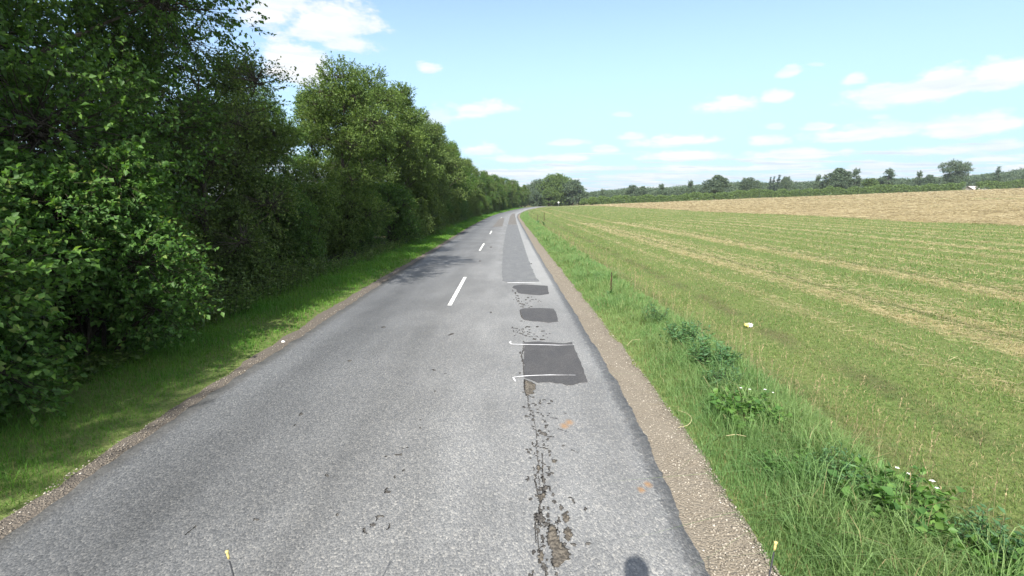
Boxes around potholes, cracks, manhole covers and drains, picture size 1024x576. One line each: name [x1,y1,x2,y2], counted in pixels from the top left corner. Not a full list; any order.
pothole [545,523,572,568]
crack [512,291,567,576]
pothole [523,380,536,396]
